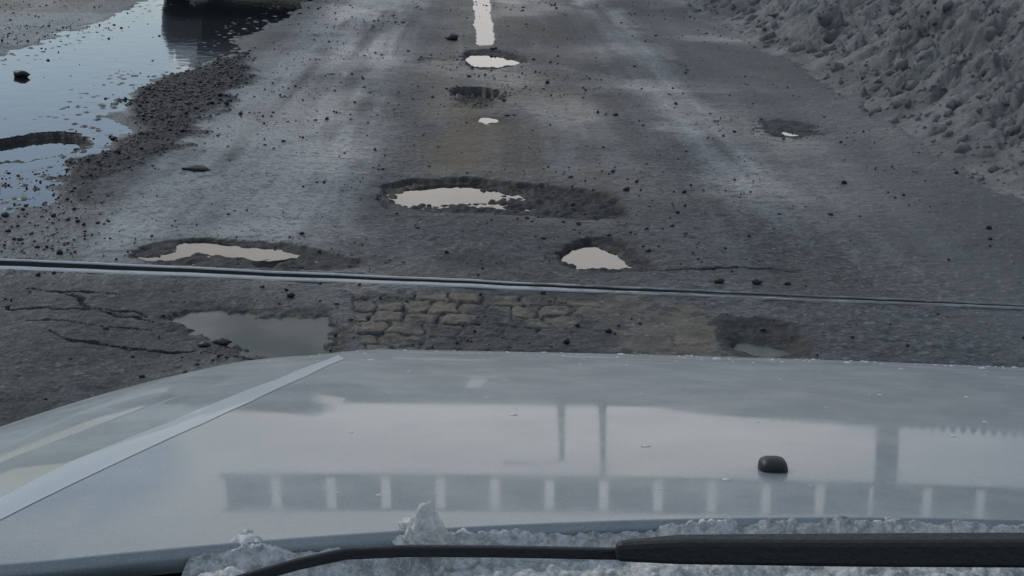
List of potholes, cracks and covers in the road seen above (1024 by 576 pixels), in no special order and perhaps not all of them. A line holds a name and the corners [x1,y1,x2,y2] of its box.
pothole [378,176,631,221]
pothole [707,315,818,359]
pothole [126,237,369,271]
crack [5,287,253,360]
pothole [151,301,354,362]
